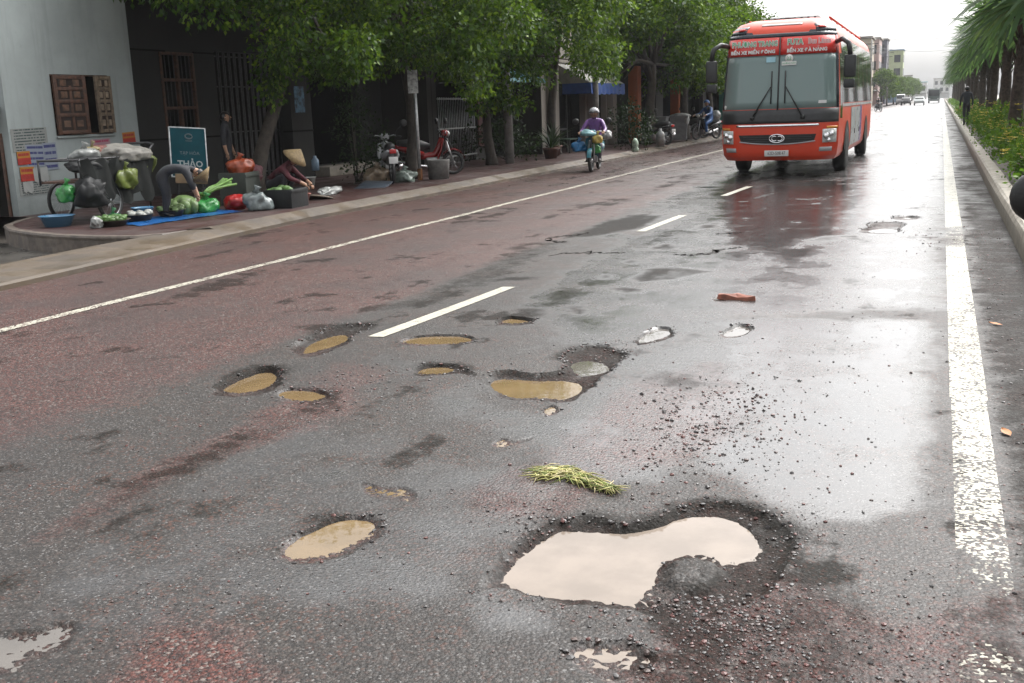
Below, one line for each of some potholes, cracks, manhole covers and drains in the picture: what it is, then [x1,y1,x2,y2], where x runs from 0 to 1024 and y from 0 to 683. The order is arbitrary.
pothole [478,496,808,623]
pothole [406,362,477,378]
pothole [206,364,288,397]
pothole [273,386,333,403]
pothole [286,322,377,357]
pothole [718,322,755,338]
pothole [857,221,907,234]
pothole [494,316,539,326]
pothole [552,637,664,683]
pothole [358,481,418,502]
pothole [479,343,632,403]
pothole [633,325,678,345]
